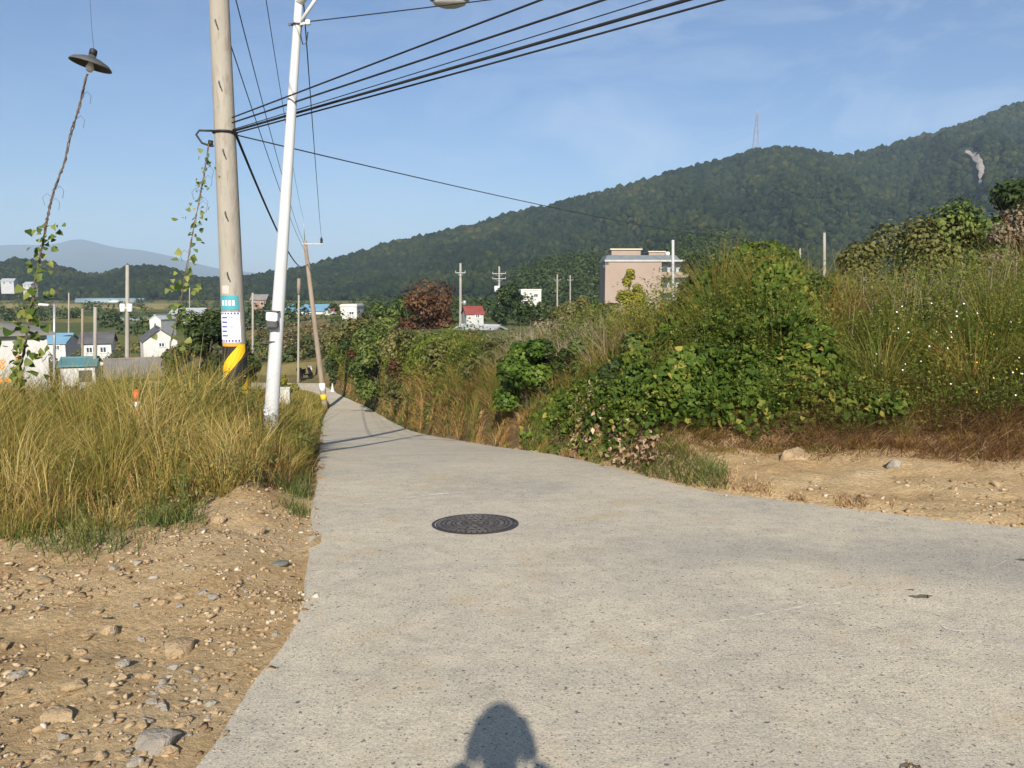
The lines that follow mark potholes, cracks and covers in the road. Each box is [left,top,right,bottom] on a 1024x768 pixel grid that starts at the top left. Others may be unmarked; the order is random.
manhole cover [432,514,519,535]
